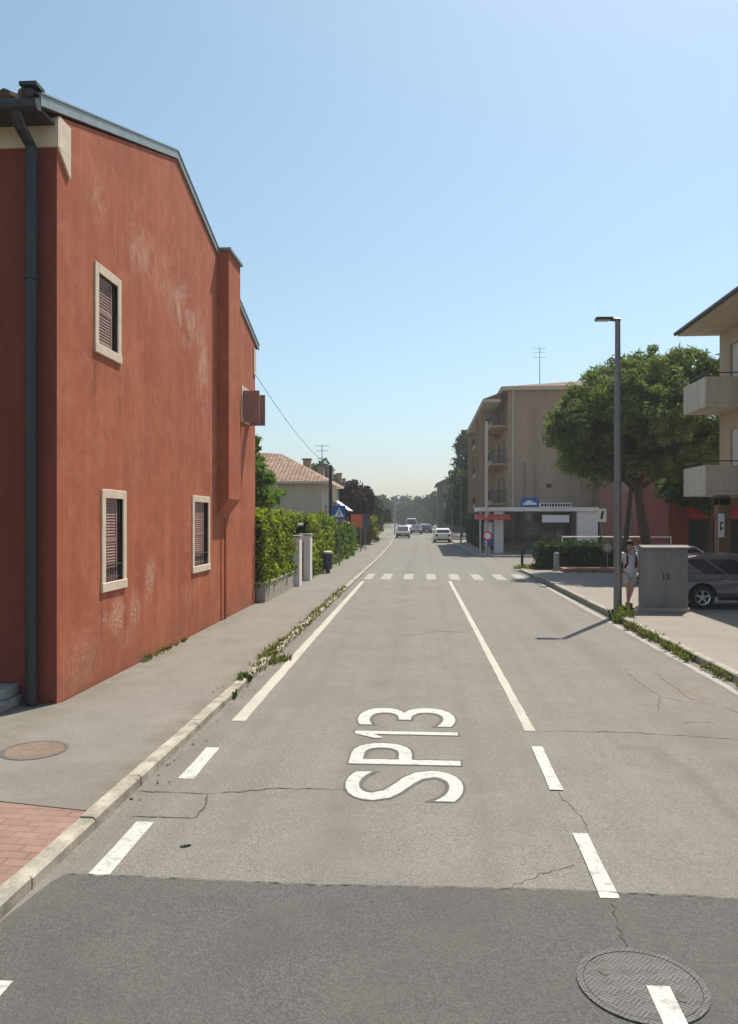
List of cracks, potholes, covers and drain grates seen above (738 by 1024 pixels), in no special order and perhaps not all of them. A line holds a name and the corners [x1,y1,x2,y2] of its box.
manhole cover [0,740,69,760]
crack [609,664,738,713]
crack [611,903,627,946]
manhole cover [576,948,711,1024]
